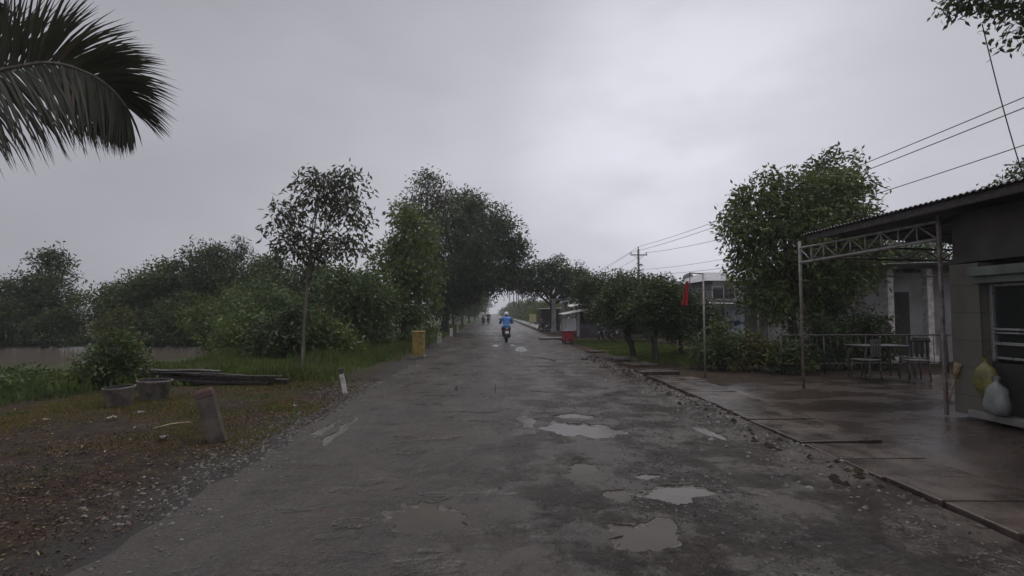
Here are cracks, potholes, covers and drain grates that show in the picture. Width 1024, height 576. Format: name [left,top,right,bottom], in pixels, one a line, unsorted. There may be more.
pothole [631,484,720,505]
pothole [515,416,538,428]
pothole [381,501,468,536]
pothole [601,489,635,503]
pothole [536,421,629,439]
pothole [605,517,683,552]
pothole [567,462,600,475]
pothole [691,425,729,441]
